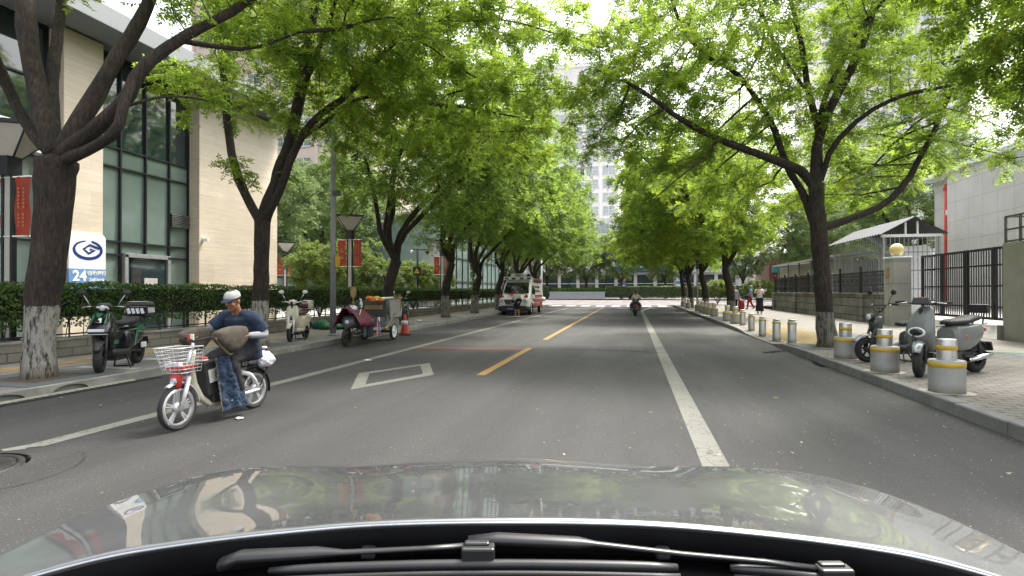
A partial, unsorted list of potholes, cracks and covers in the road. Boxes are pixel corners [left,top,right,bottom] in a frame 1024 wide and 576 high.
manhole cover [0,453,31,473]
